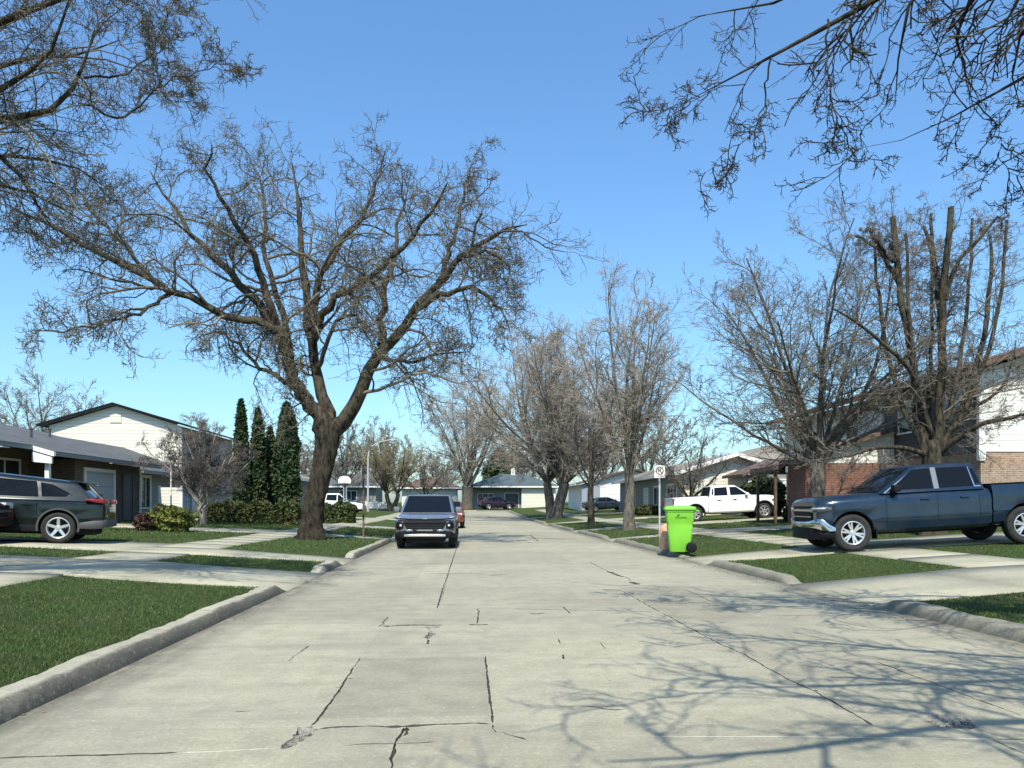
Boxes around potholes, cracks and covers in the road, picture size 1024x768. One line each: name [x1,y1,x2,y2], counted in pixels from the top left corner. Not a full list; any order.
crack [347,727,430,768]
pothole [924,715,978,729]
pothole [281,726,319,749]
